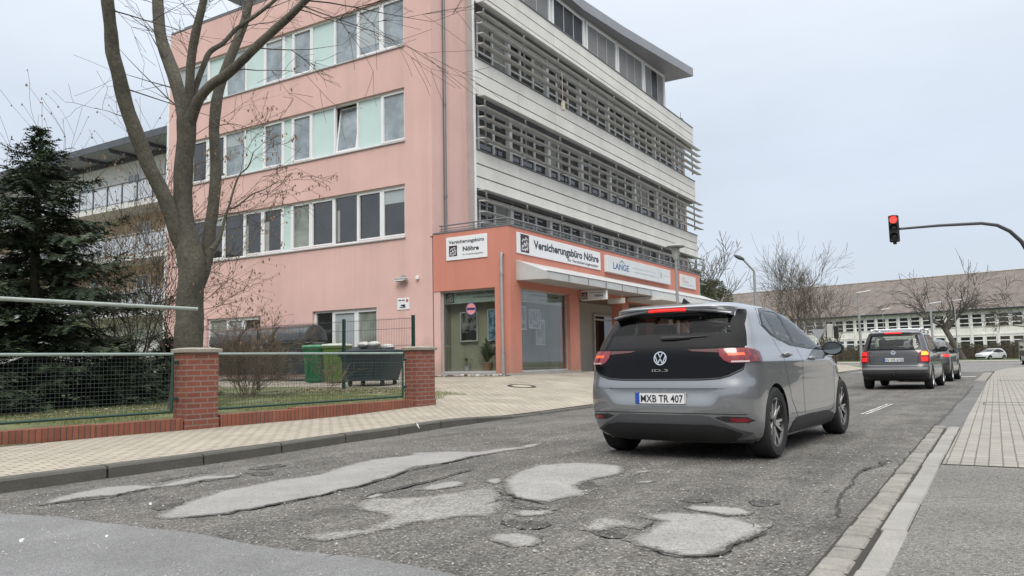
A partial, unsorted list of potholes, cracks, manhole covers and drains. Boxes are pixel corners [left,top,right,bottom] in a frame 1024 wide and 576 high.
pothole [499,519,551,530]
crack [823,459,892,517]
pothole [749,499,780,507]
